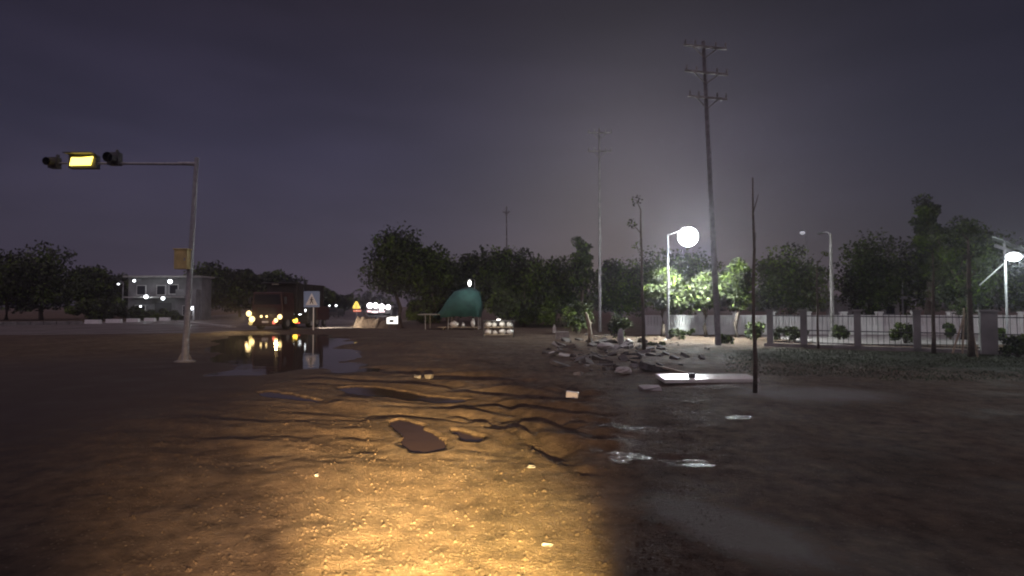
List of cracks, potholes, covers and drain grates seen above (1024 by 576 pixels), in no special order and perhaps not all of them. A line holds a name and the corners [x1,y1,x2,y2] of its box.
pothole [381,417,458,456]
pothole [250,389,330,403]
pothole [443,426,493,444]
pothole [331,385,478,405]
